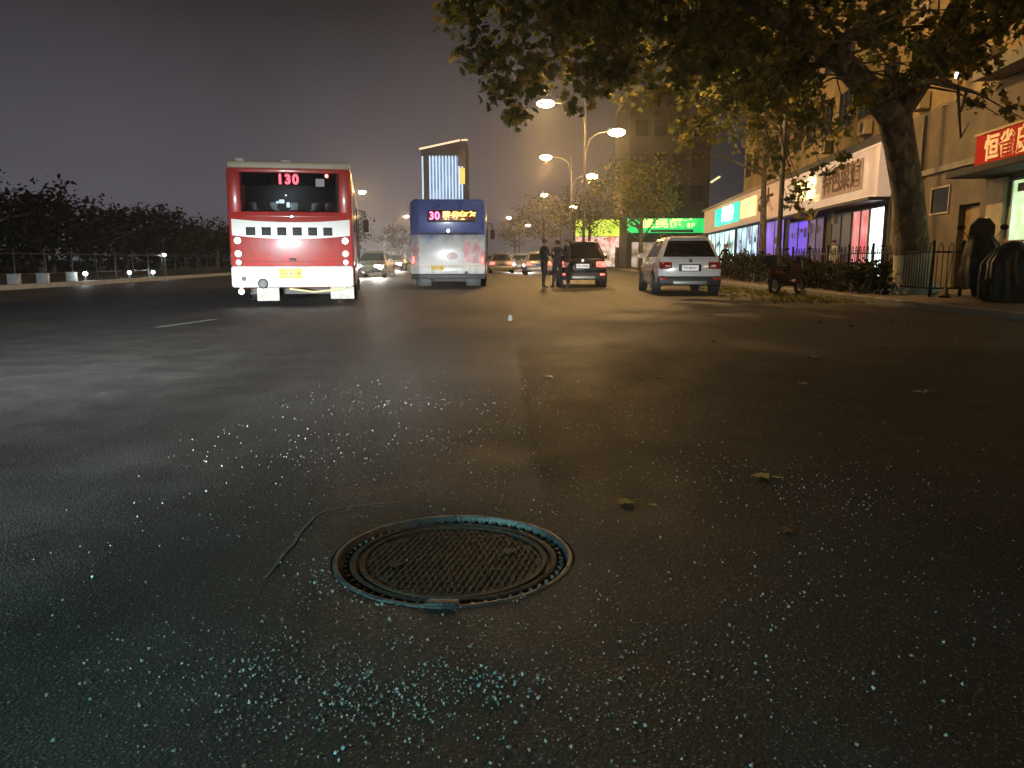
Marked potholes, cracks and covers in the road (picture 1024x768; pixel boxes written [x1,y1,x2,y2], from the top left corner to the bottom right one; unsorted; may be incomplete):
crack [263,501,403,579]
manhole cover [331,515,575,609]
